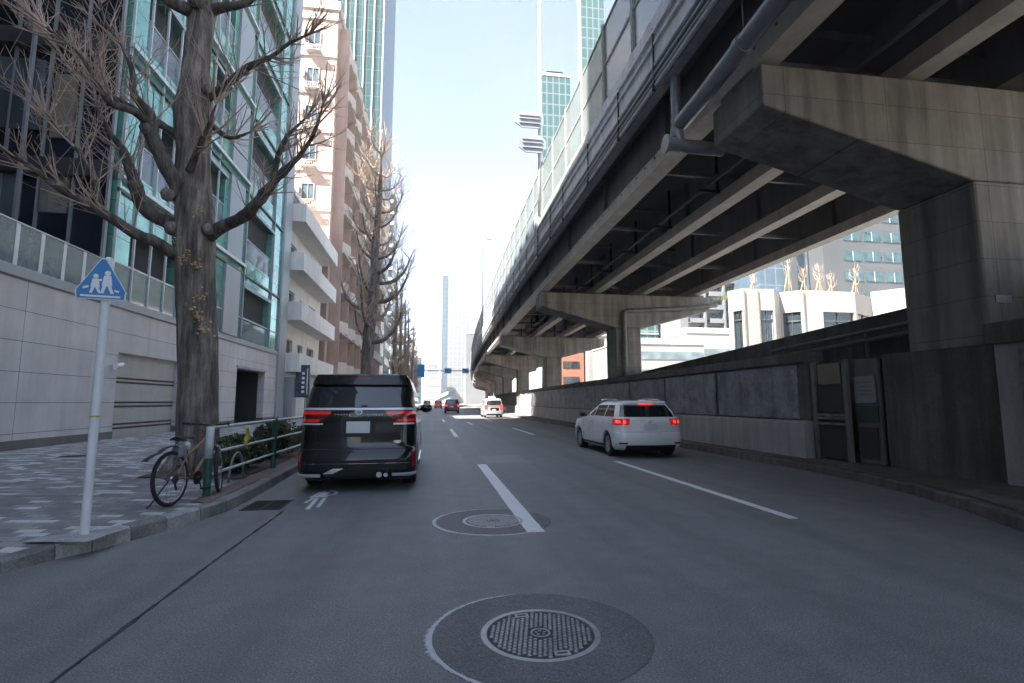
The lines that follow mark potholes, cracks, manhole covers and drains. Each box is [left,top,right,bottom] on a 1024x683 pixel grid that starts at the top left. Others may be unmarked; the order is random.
drain grate [238,500,293,511]
manhole cover [423,594,655,683]
manhole cover [431,509,551,536]
